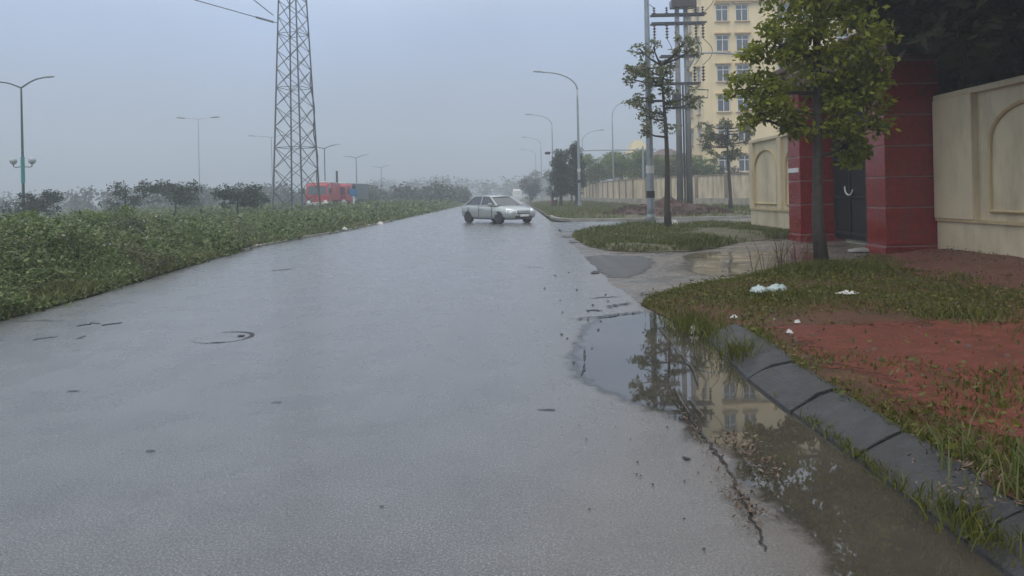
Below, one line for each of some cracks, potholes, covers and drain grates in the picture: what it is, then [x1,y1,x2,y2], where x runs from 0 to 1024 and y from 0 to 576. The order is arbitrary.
crack [685,410,767,550]
crack [570,296,640,319]
manhole cover [192,331,255,343]
